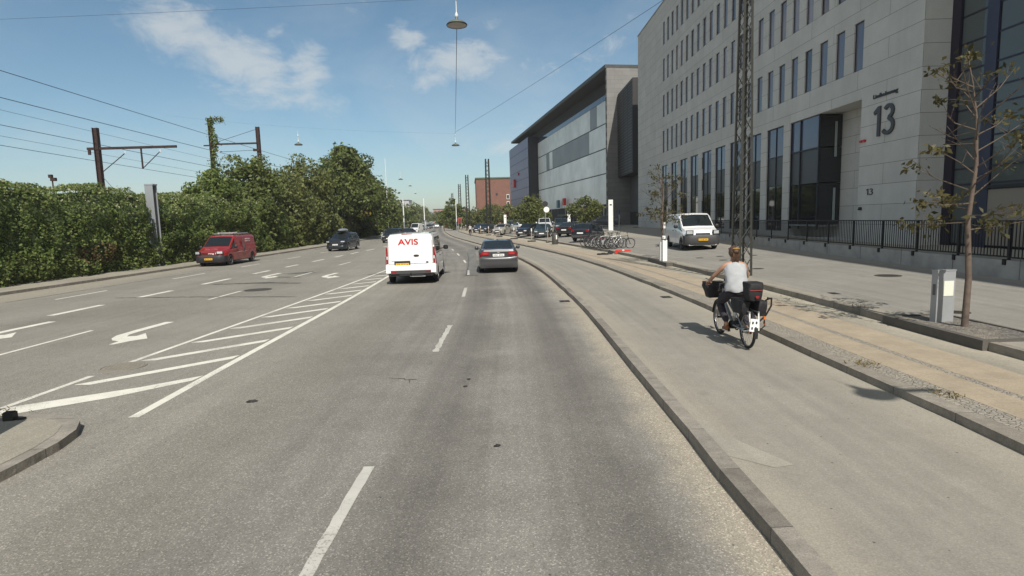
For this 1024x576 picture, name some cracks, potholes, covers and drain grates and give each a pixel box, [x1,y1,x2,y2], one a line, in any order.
manhole cover [98,361,148,373]
